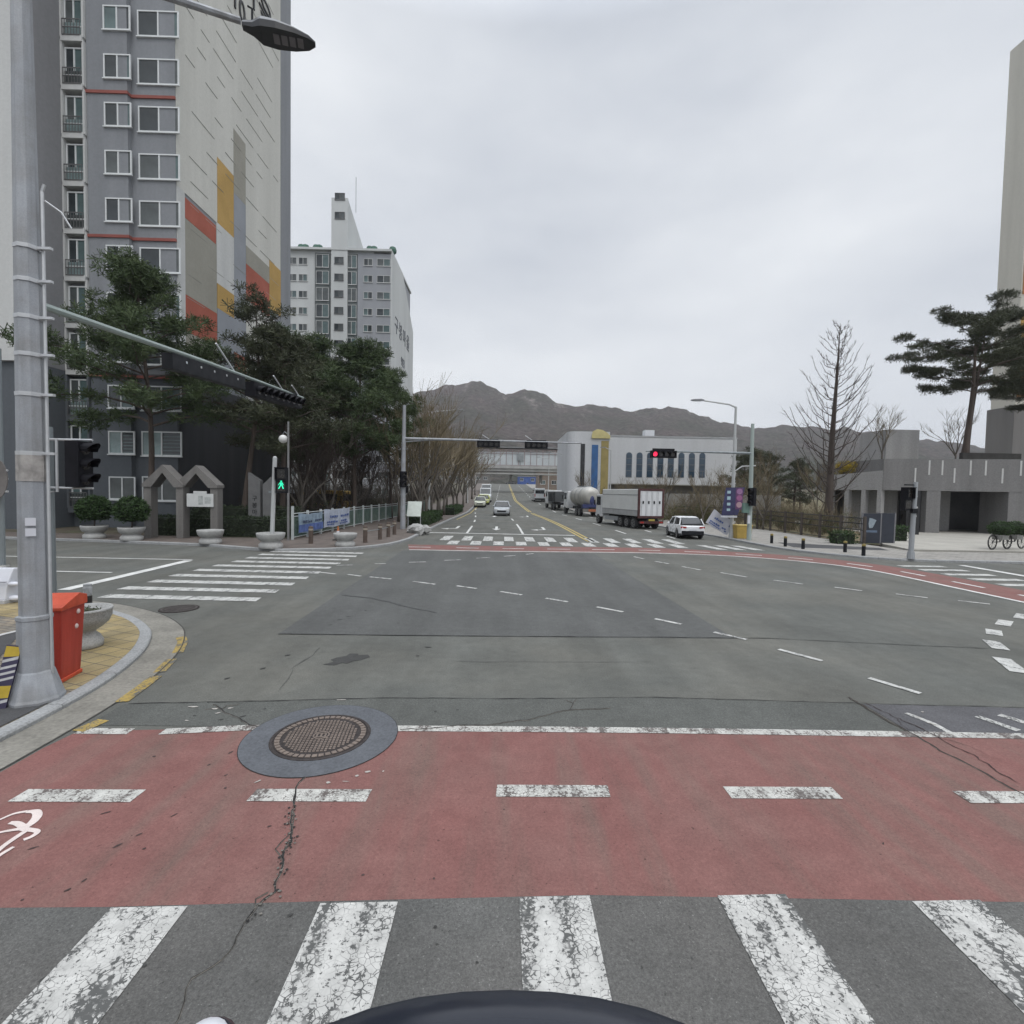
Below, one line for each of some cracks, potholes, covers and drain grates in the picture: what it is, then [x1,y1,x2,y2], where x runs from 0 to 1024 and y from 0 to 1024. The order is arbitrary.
crack [175,777,306,1024]
crack [205,704,257,727]
crack [848,697,1024,795]
crack [400,700,611,730]
manhole cover [158,604,200,613]
manhole cover [237,705,398,778]
crack [345,595,437,613]
